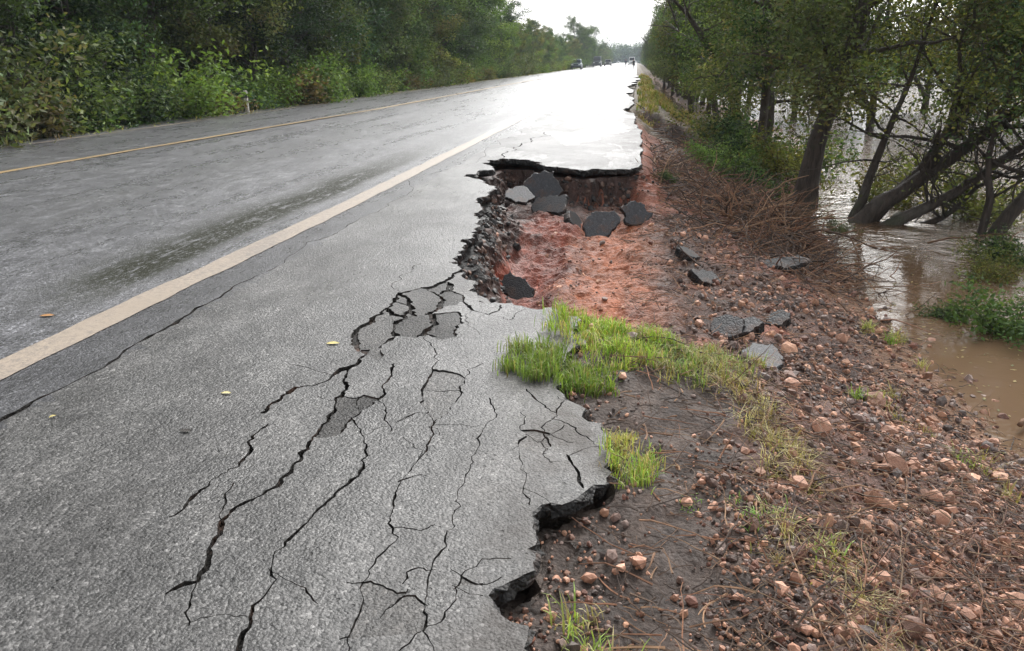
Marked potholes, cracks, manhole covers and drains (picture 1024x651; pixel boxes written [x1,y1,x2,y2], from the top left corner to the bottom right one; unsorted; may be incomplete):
crack [165,264,522,651]
pothole [444,158,687,344]
crack [515,389,599,506]
